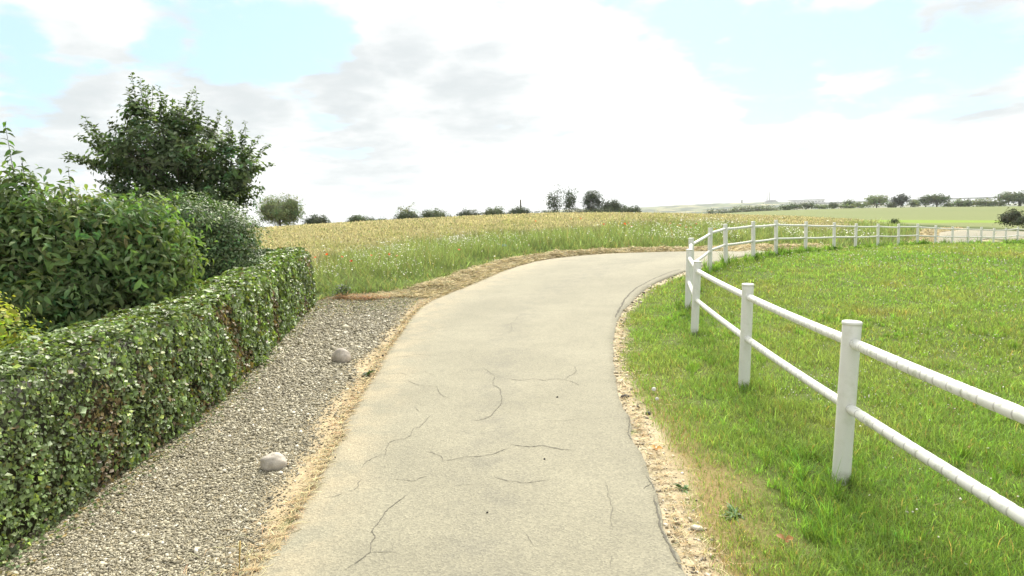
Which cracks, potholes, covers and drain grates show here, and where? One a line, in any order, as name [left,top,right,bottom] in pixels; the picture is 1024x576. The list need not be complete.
crack [480,368,577,420]
crack [331,408,570,569]
